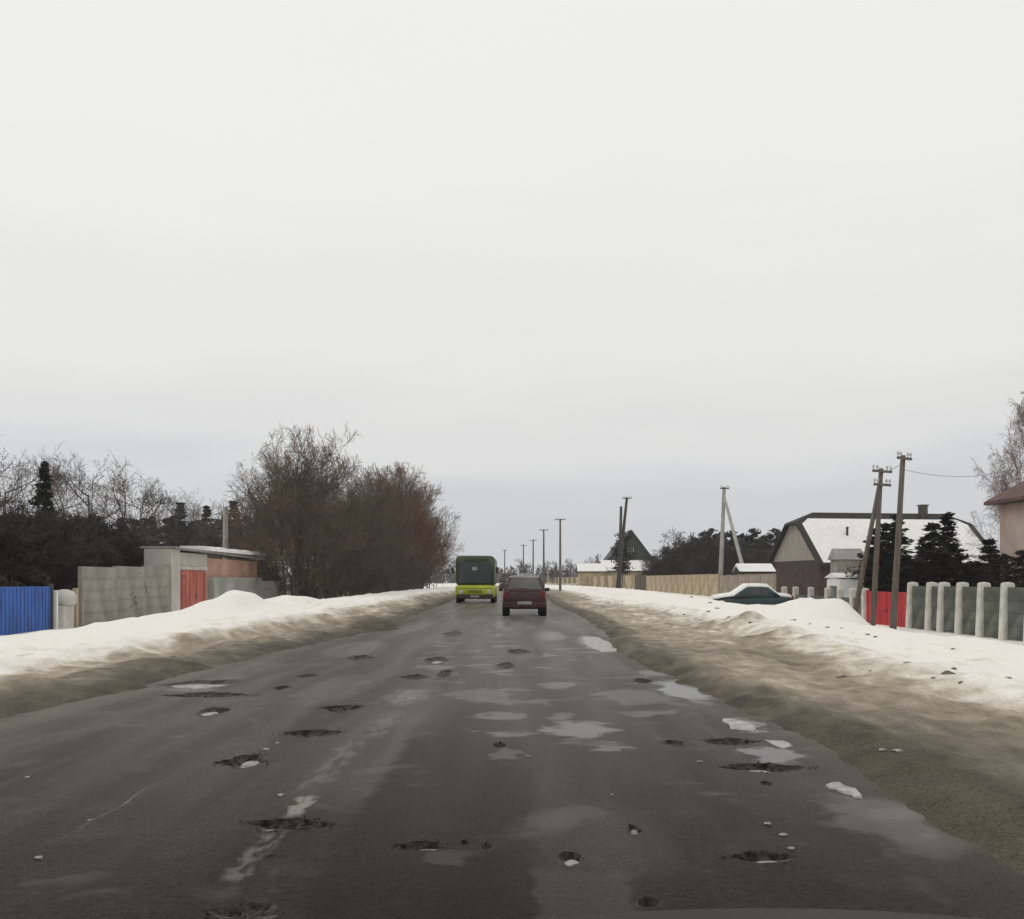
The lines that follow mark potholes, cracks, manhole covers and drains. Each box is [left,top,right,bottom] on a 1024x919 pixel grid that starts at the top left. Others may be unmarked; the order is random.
pothole [636,896,662,908]
pothole [213,752,268,769]
pothole [716,849,802,864]
pothole [398,673,429,681]
pothole [194,706,236,718]
pothole [558,851,584,867]
pothole [156,679,249,689]
pothole [423,656,449,665]
pothole [239,815,342,832]
pothole [318,703,371,714]
pothole [391,840,448,850]
pothole [494,662,516,670]
